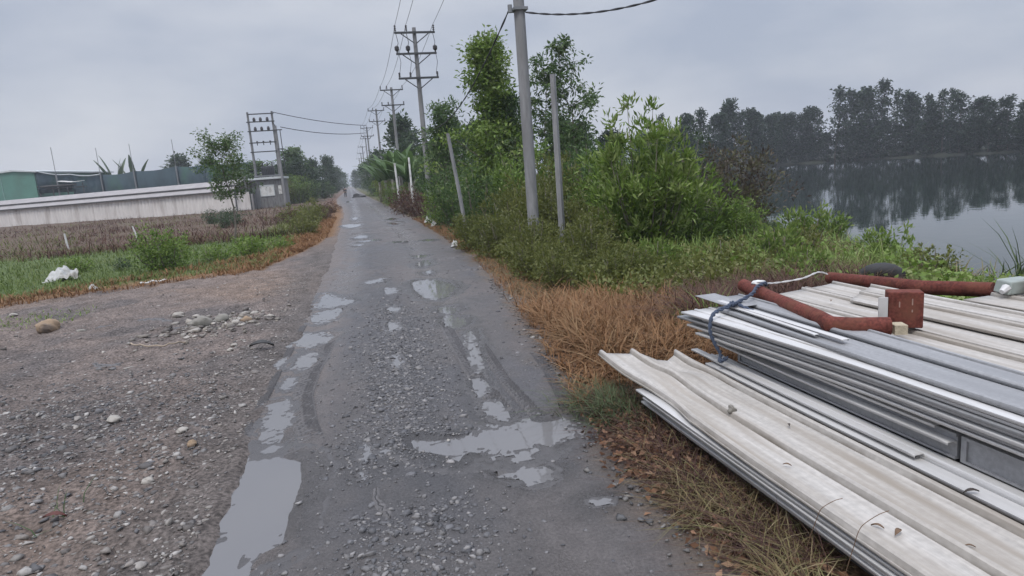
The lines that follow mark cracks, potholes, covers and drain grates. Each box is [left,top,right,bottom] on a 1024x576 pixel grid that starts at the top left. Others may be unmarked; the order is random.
pothole [399,278,472,302]
pothole [481,461,565,491]
pothole [461,374,500,400]
pothole [202,442,344,576]
crack [372,486,392,519]
pothole [372,413,597,476]
pothole [458,328,496,377]
pothole [472,395,521,425]
